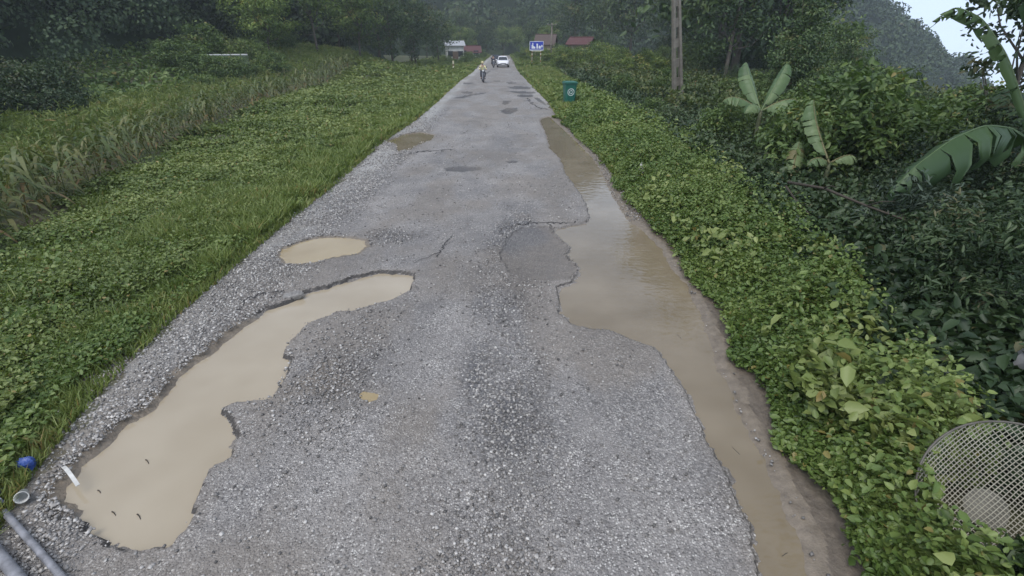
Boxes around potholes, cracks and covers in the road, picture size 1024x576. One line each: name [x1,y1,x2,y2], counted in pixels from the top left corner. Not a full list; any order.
pothole [386,131,439,152]
pothole [271,234,376,267]
crack [501,219,576,230]
pothole [538,115,833,576]
pothole [29,269,421,552]
